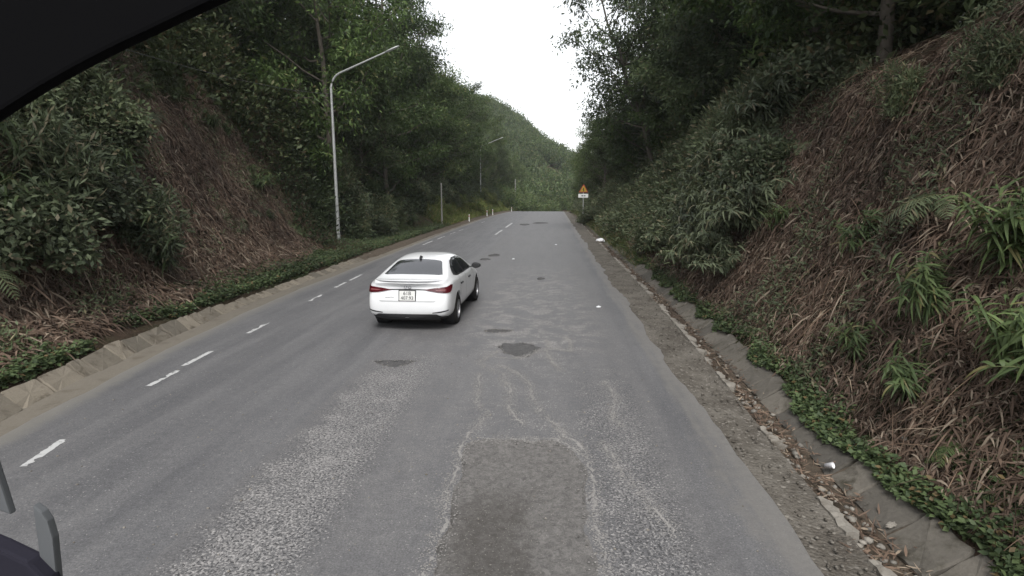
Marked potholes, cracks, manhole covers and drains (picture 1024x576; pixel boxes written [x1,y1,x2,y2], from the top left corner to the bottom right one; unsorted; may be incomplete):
pothole [498,343,540,357]
crack [408,337,692,576]
